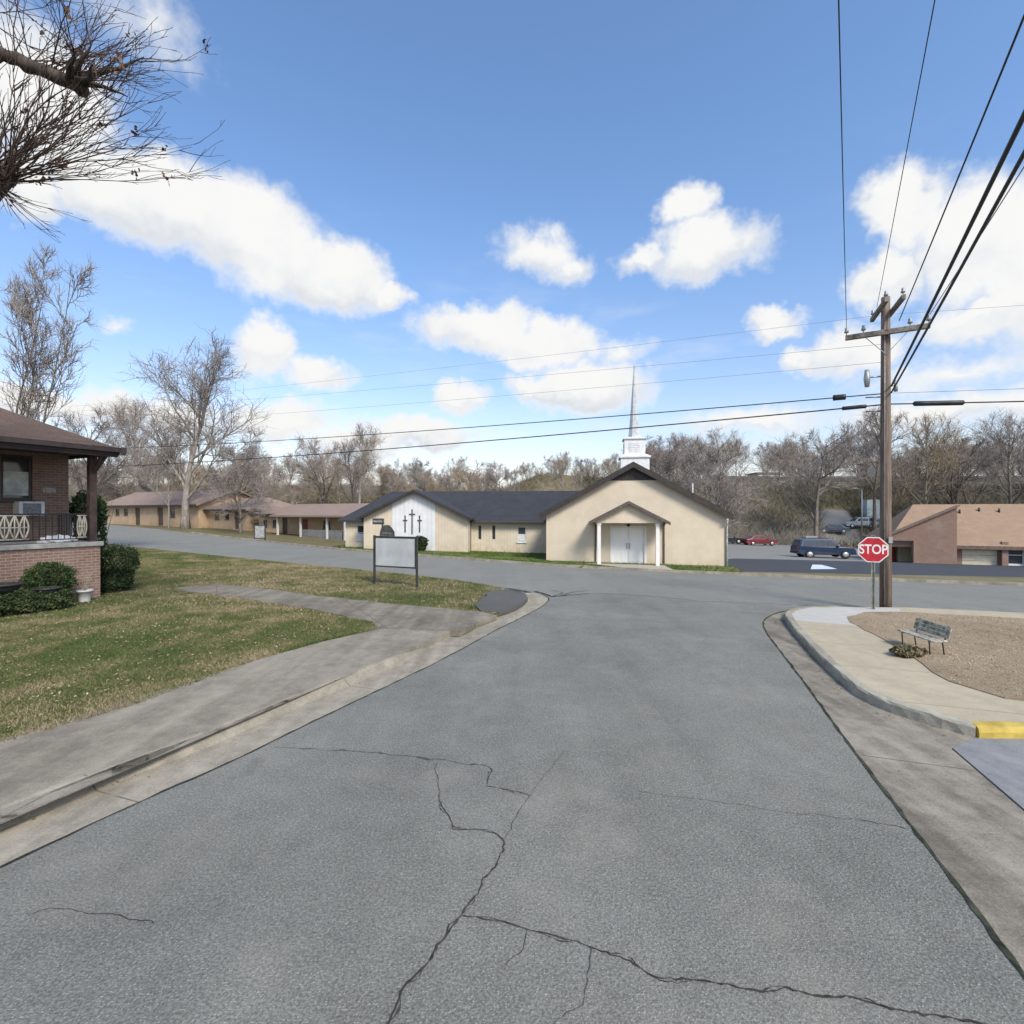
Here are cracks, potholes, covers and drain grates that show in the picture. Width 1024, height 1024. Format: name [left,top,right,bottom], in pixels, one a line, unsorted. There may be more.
crack [34,908,154,923]
crack [287,747,986,1024]
